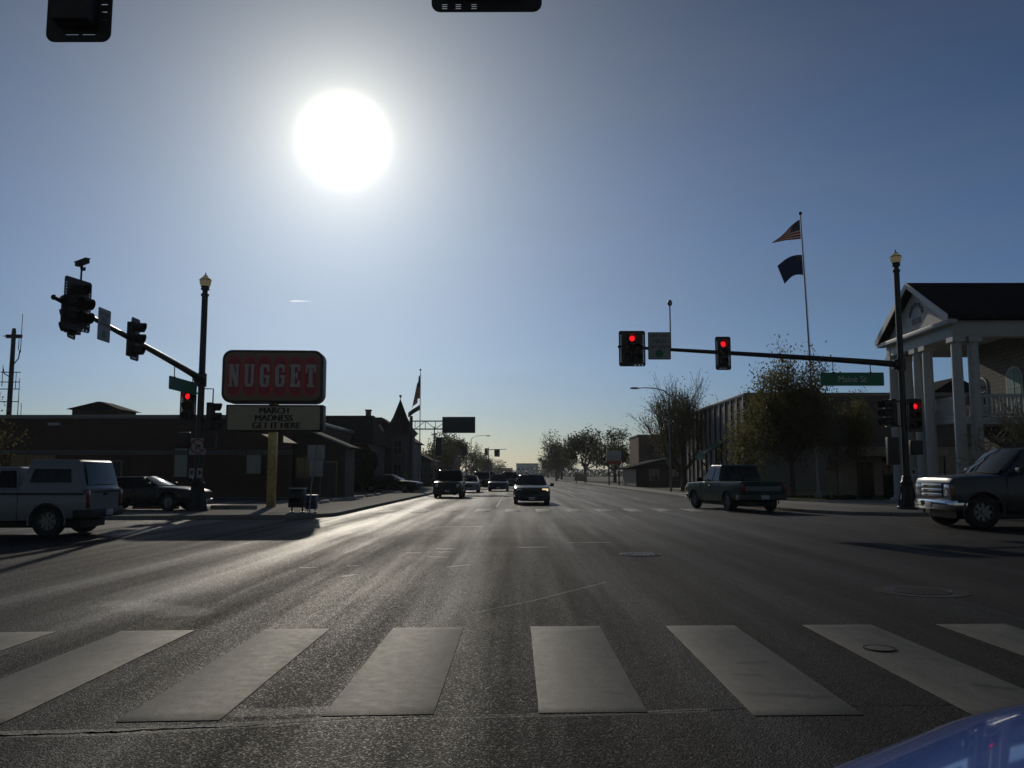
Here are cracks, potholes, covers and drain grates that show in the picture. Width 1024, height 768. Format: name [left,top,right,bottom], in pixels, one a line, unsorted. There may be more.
manhole cover [873,586,970,598]
